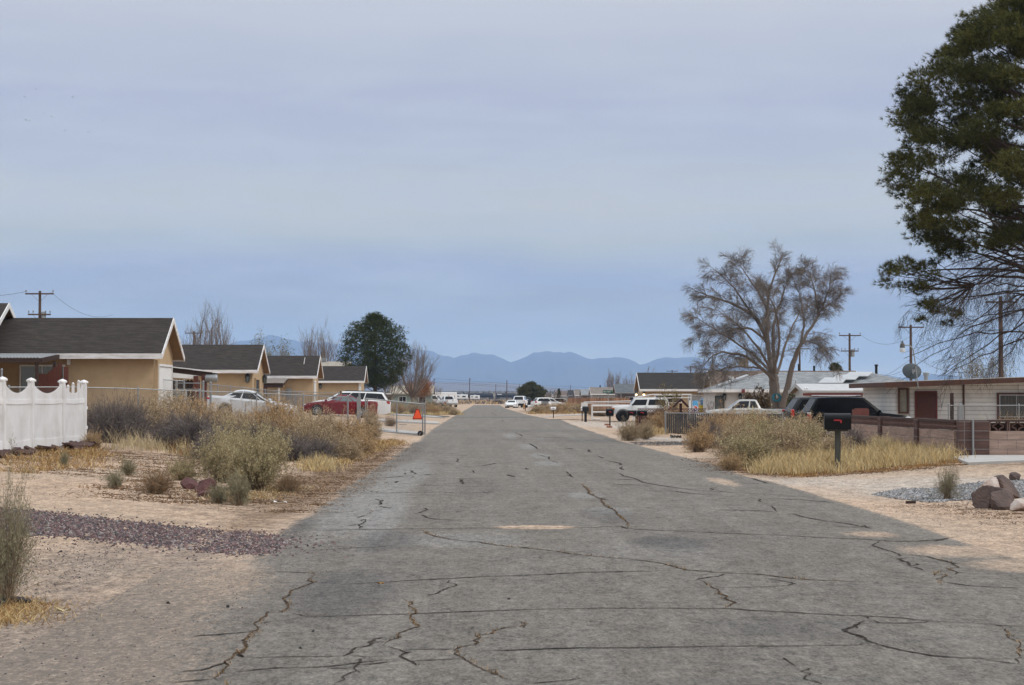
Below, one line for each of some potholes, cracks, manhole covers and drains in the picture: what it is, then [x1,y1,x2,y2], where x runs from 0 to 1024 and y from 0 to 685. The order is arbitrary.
crack [178,414,1024,685]
